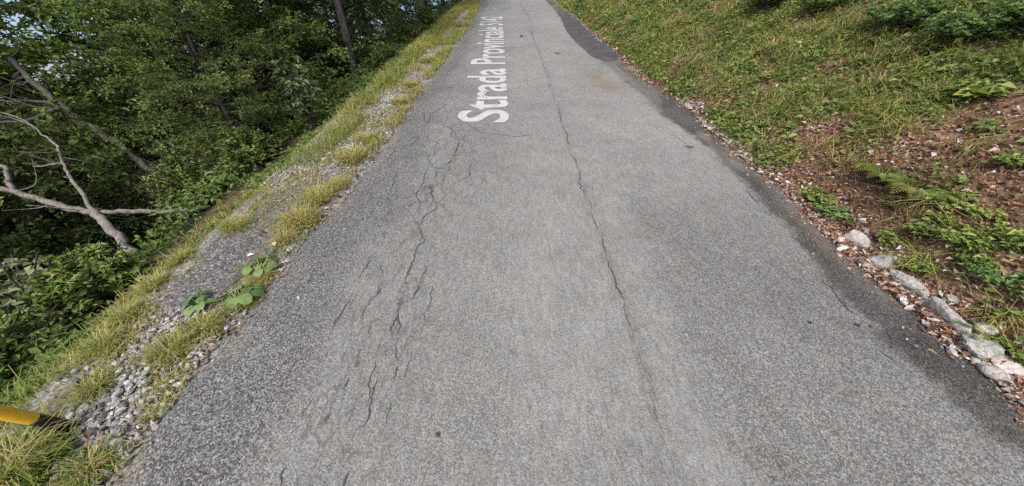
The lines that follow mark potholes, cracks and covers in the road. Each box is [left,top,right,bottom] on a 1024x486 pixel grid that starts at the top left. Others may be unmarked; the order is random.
crack [329,104,525,430]
